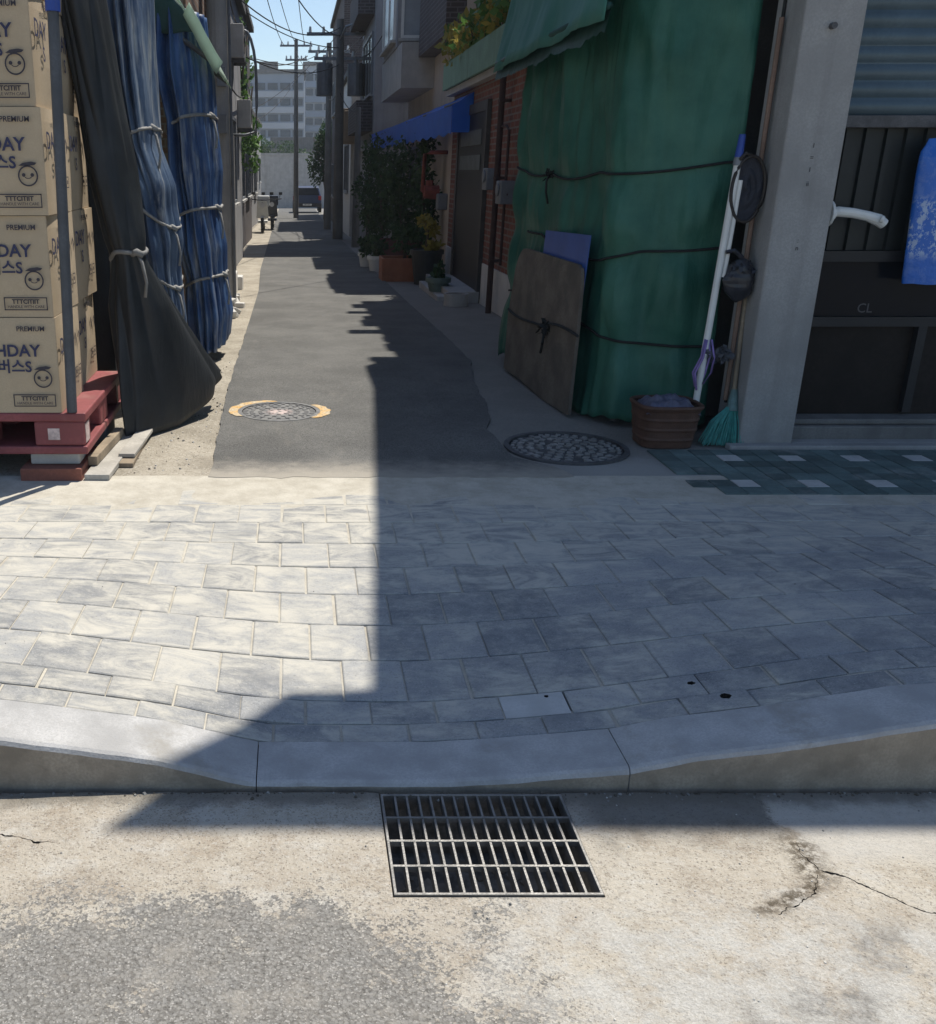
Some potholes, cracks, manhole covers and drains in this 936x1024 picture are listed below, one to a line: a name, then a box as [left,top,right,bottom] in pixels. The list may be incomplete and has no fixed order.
crack [0,834,55,844]
drain grate [380,794,605,897]
manhole cover [229,400,331,421]
manhole cover [504,431,630,466]
crack [778,845,936,915]
